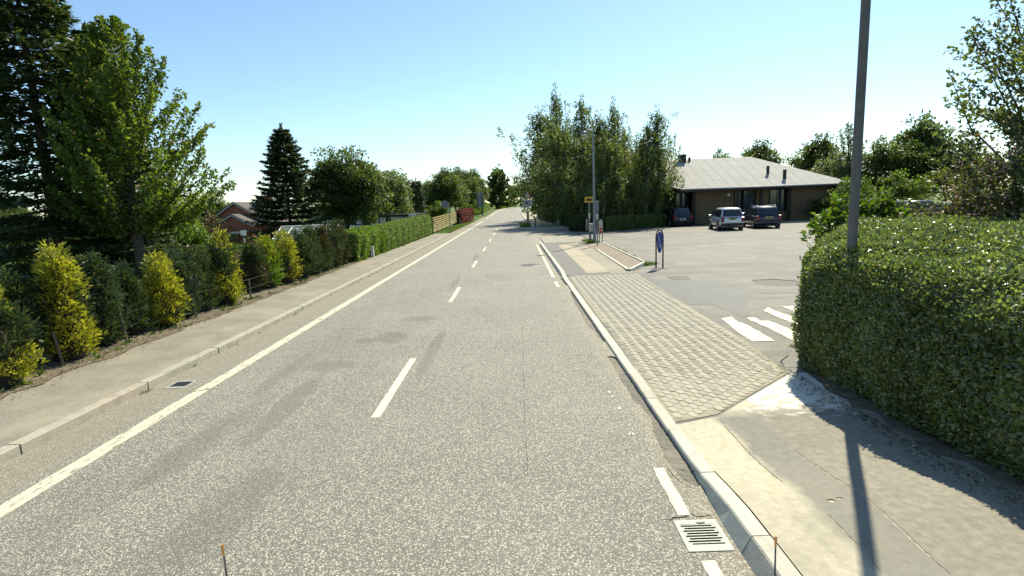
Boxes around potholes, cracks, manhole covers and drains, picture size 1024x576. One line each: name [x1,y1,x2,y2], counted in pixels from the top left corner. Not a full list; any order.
drain grate [163,380,198,389]
drain grate [673,519,735,552]
